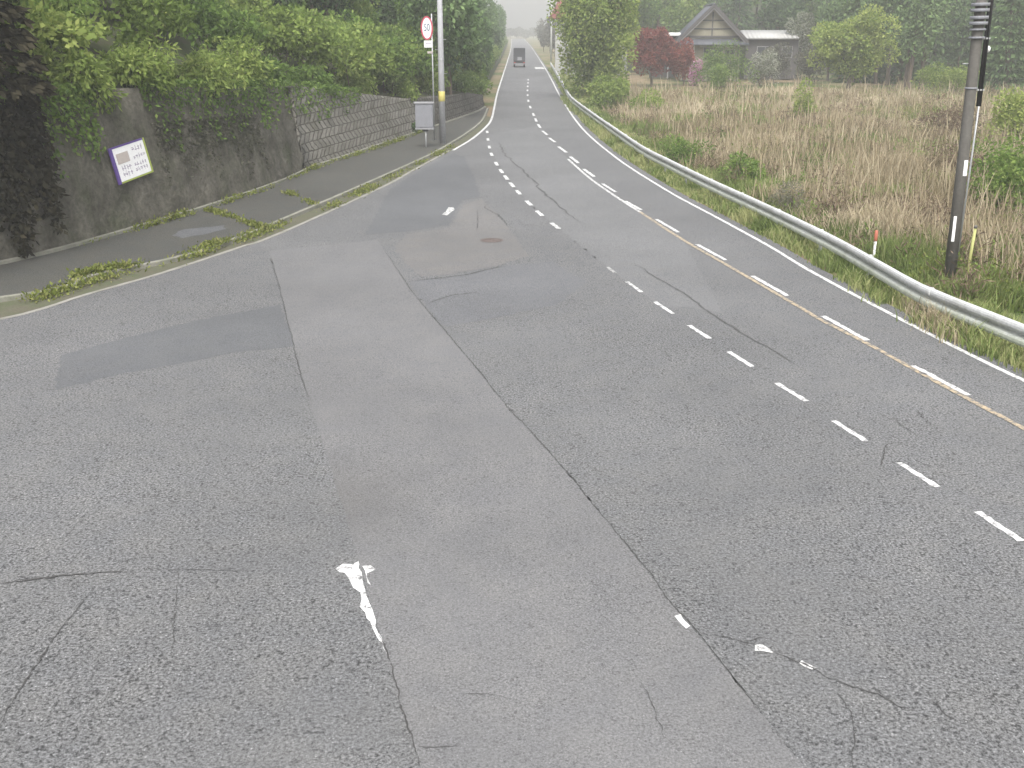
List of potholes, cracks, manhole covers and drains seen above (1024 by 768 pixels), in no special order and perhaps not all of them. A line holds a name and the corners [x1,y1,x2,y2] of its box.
crack [3,554,248,659]
crack [704,630,958,768]
crack [880,411,937,465]
crack [0,593,91,725]
